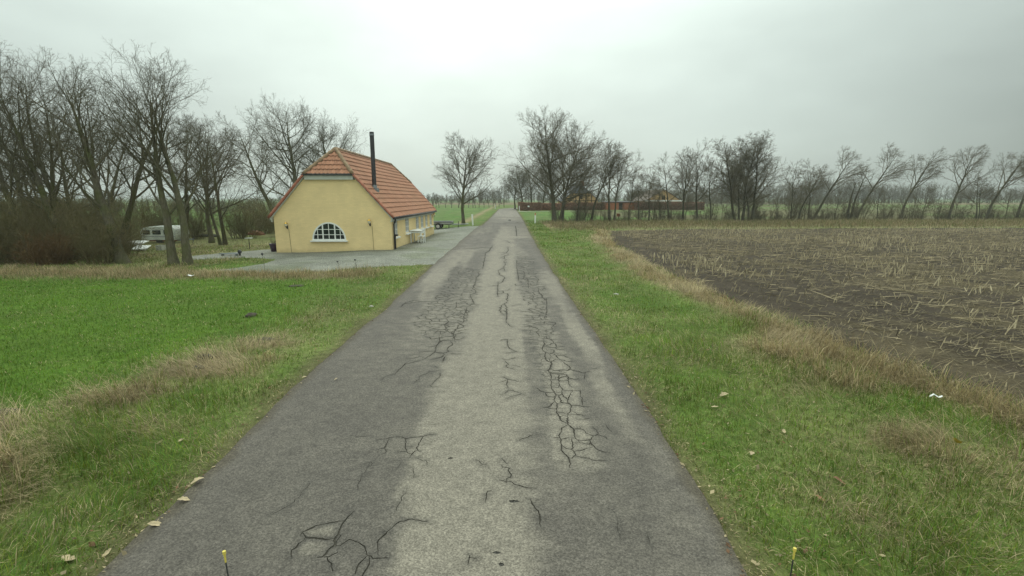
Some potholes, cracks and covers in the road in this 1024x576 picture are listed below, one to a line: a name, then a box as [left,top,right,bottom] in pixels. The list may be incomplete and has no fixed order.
crack [268,423,439,576]
crack [478,459,541,526]
crack [381,247,613,468]
